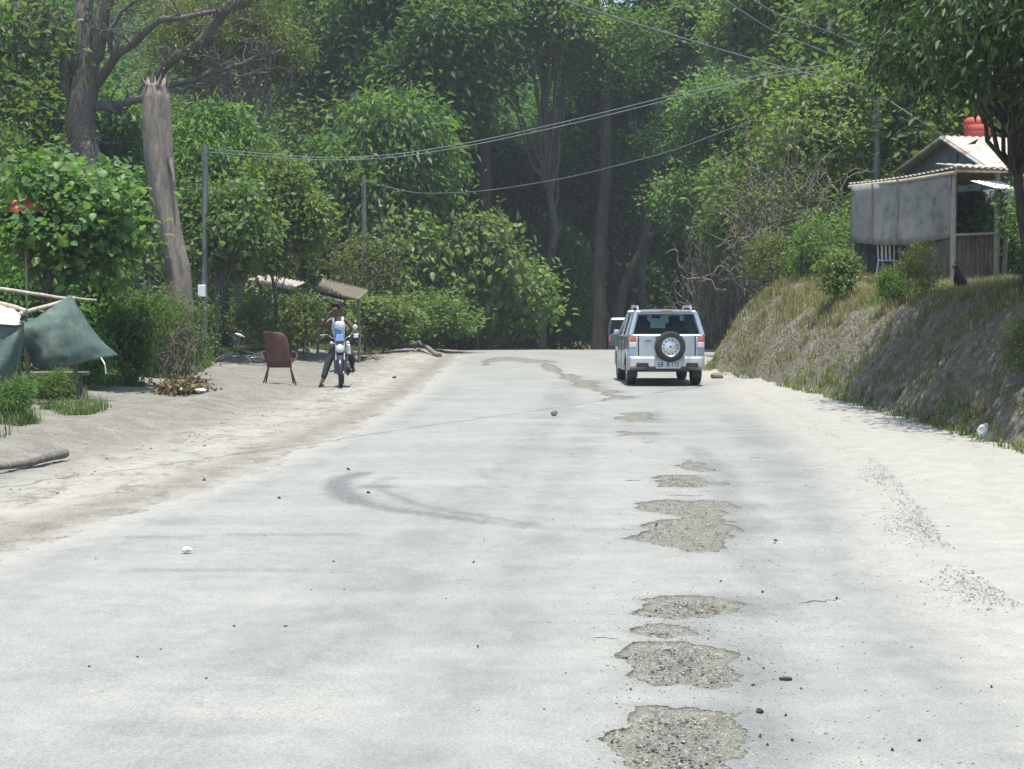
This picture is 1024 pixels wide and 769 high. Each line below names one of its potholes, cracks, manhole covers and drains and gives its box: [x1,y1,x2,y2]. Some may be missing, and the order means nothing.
pothole [622,500,744,553]
pothole [614,412,655,422]
pothole [614,641,743,689]
pothole [629,623,699,639]
pothole [629,595,751,620]
pothole [675,460,715,472]
pothole [598,705,750,769]
pothole [652,475,729,487]
